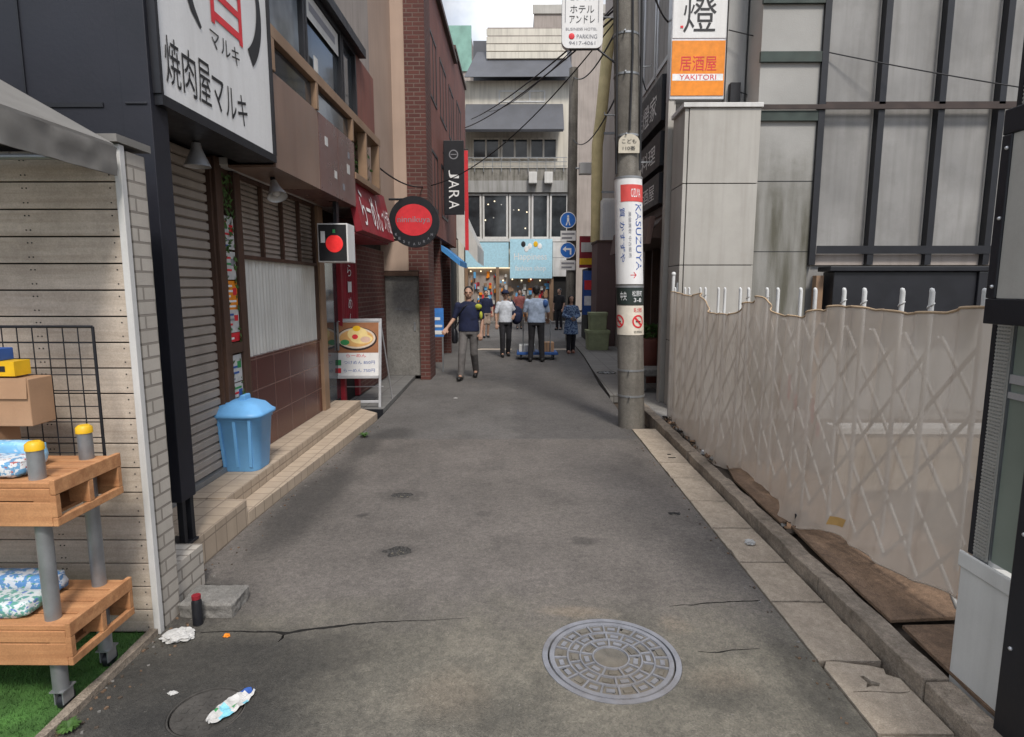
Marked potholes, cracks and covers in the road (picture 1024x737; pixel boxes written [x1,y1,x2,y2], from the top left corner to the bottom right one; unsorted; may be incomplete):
manhole cover [165,686,247,737]
crack [201,618,462,642]
manhole cover [542,619,682,705]
